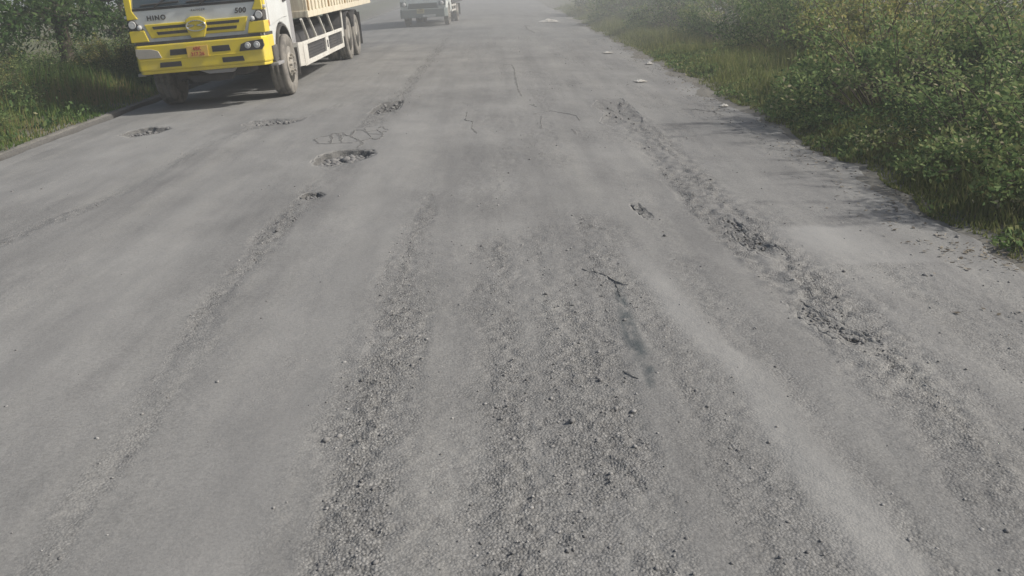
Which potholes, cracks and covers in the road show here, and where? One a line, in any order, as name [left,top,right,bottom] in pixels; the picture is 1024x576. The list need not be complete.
pothole [592,97,646,126]
pothole [721,213,787,262]
pothole [299,192,324,200]
pothole [631,203,653,219]
pothole [310,149,377,167]
pothole [368,100,403,115]
pothole [120,127,170,138]
crack [313,126,389,147]
pothole [238,117,306,127]
crack [582,269,628,297]
crack [511,65,579,134]
